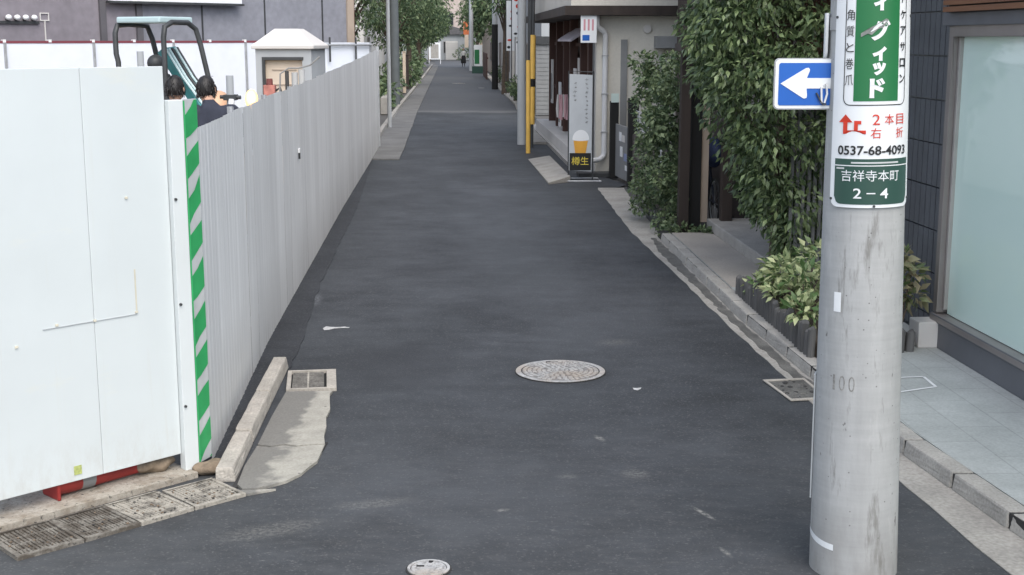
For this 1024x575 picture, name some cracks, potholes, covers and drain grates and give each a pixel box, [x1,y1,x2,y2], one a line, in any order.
drain grate [51,505,140,542]
drain grate [0,519,84,561]
drain grate [105,491,194,526]
manhole cover [515,360,606,383]
manhole cover [406,559,452,575]
drain grate [286,369,337,391]
drain grate [162,478,246,510]
